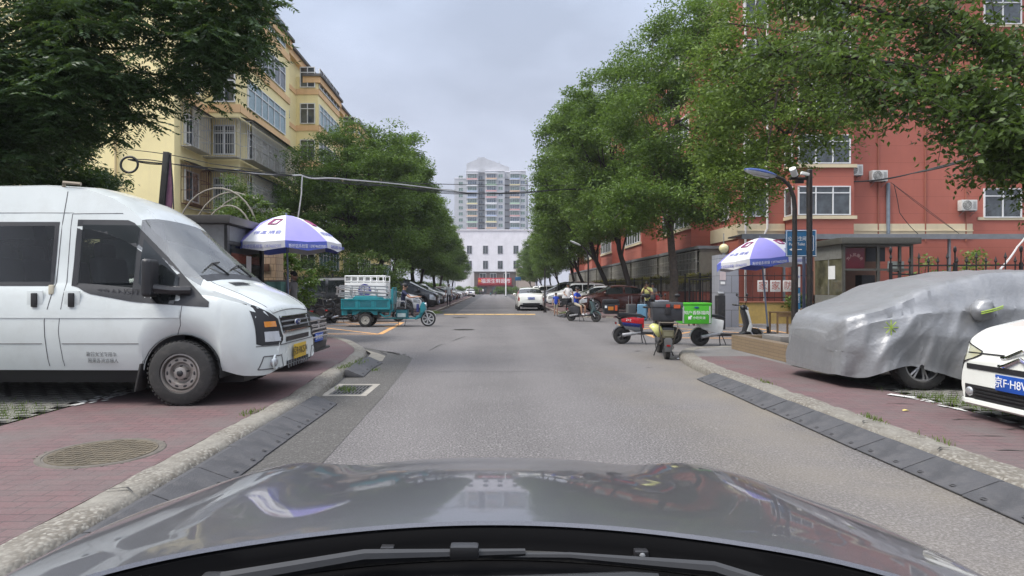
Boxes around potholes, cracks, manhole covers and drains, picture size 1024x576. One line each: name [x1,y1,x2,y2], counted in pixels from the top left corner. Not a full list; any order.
manhole cover [33,437,167,470]
drain grate [322,384,380,396]
